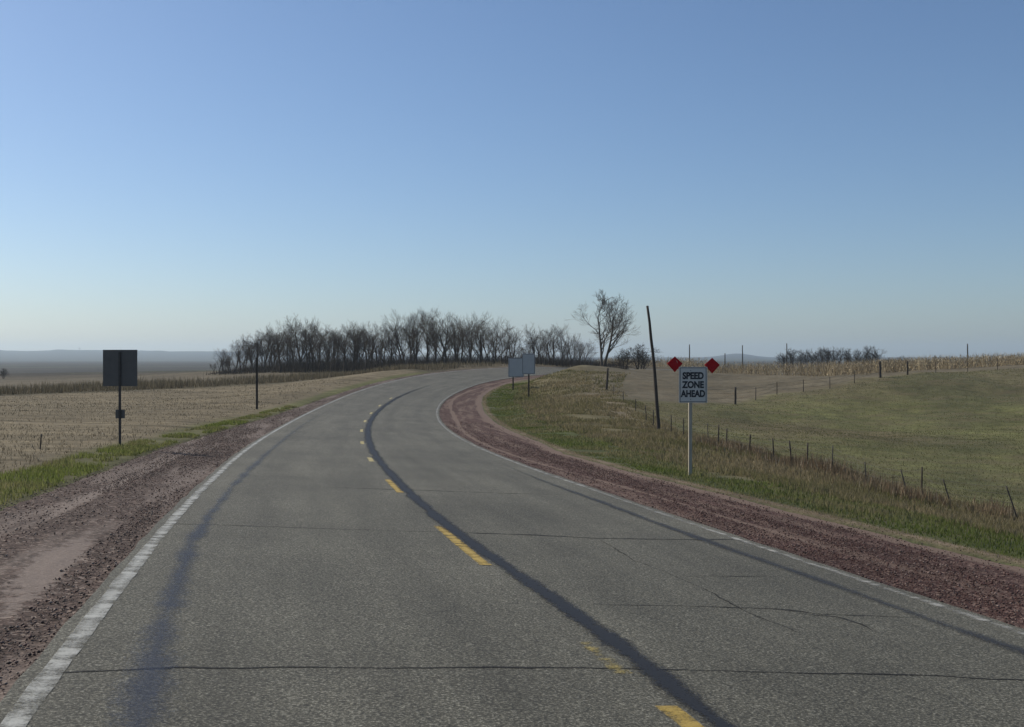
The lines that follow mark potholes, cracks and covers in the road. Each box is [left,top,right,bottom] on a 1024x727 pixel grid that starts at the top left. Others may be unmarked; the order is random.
crack [157,523,916,632]
crack [36,666,1021,680]
